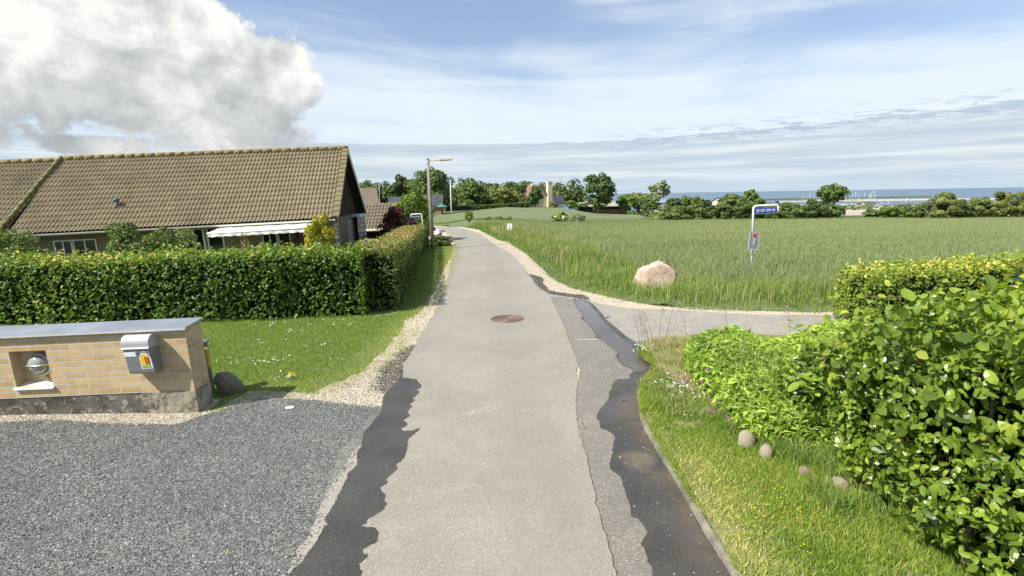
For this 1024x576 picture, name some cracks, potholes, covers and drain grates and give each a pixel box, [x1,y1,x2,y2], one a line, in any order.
manhole cover [491,315,525,323]
